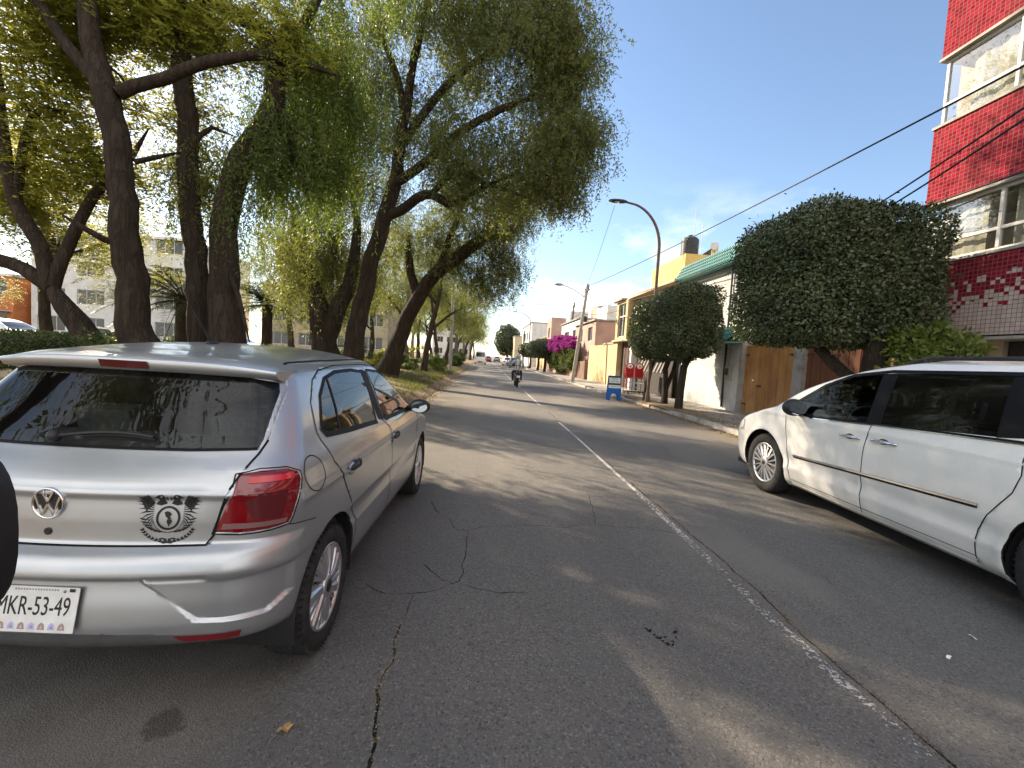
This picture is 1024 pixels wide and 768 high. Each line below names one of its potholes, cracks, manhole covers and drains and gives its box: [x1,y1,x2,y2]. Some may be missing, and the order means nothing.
crack [365,492,677,768]
